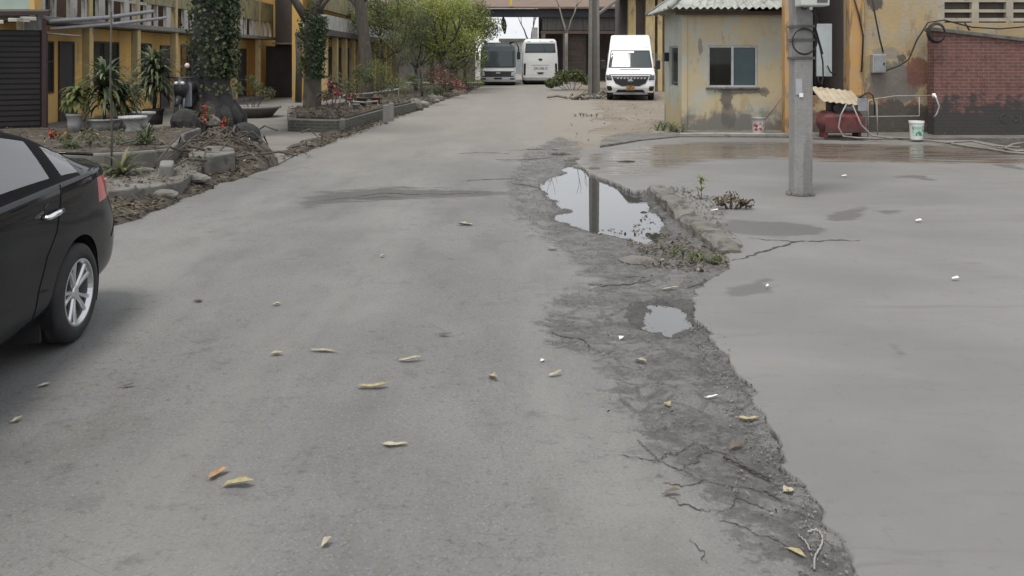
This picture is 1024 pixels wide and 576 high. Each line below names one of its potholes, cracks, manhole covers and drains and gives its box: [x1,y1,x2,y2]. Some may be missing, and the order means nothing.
crack [621,442,792,560]
crack [733,238,858,260]
pothole [623,299,702,339]
pothole [540,172,674,242]
